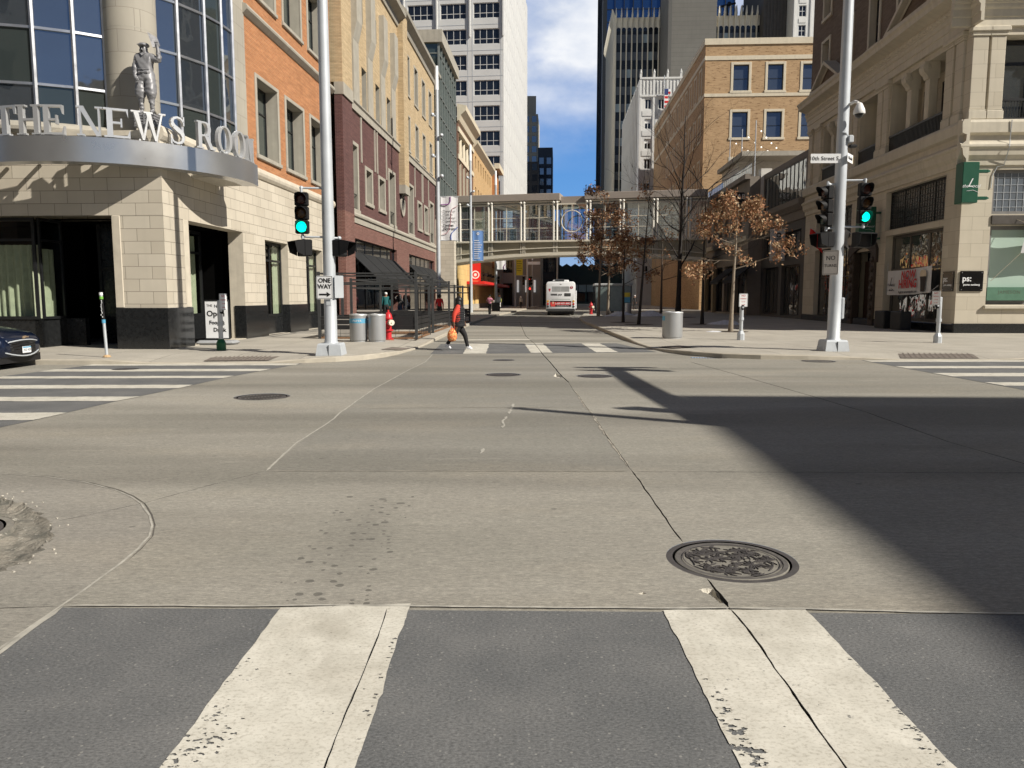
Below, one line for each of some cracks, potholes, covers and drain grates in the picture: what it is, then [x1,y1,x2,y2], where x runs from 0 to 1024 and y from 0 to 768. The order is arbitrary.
pothole [0,496,54,572]
crack [521,326,948,544]
crack [707,579,845,767]
crack [324,613,386,768]
manhole cover [666,540,799,583]
